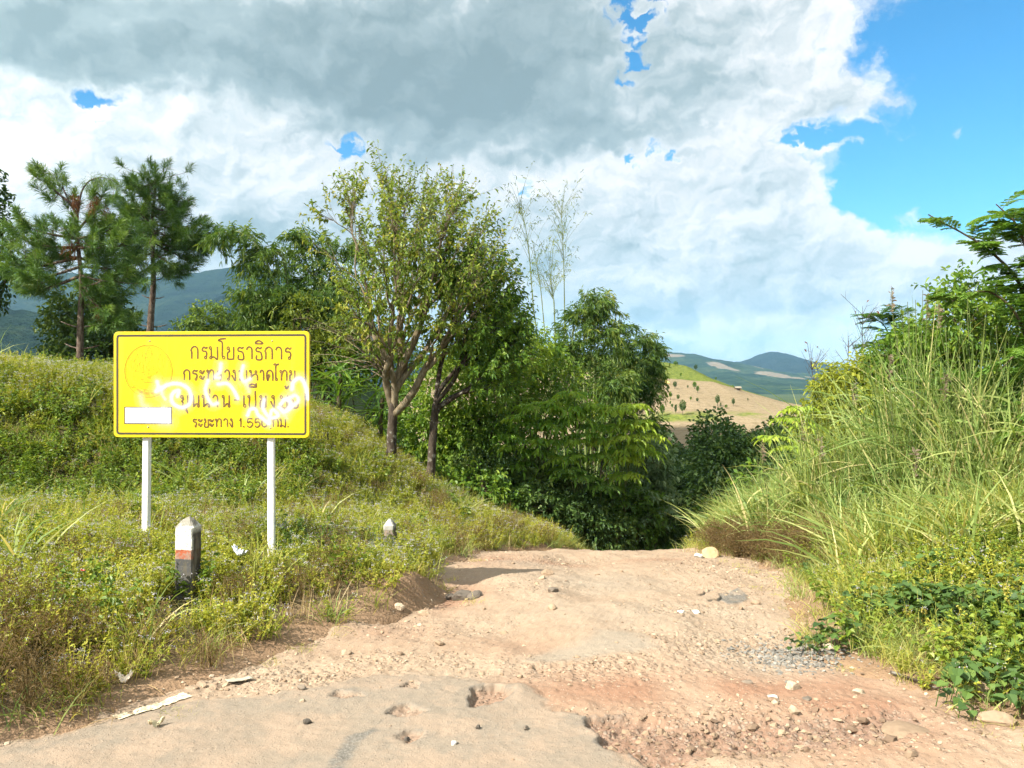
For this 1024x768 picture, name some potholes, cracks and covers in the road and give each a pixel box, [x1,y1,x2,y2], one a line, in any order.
pothole [386,702,426,717]
pothole [468,685,514,708]
pothole [395,730,426,744]
pothole [585,702,948,768]
pothole [329,689,365,699]
